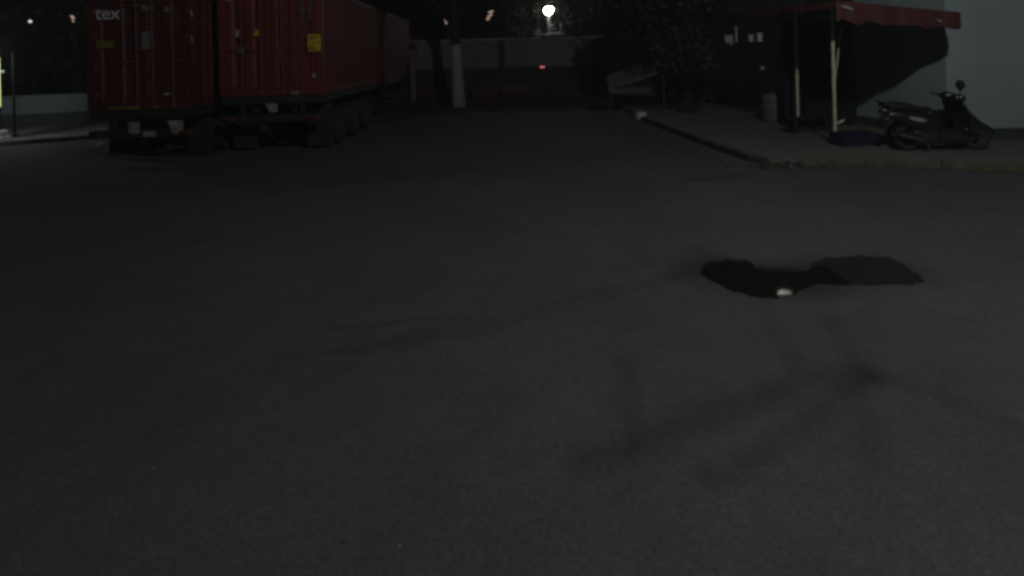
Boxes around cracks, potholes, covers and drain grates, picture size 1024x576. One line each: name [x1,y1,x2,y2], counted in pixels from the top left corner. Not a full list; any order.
pothole [698,255,925,299]
